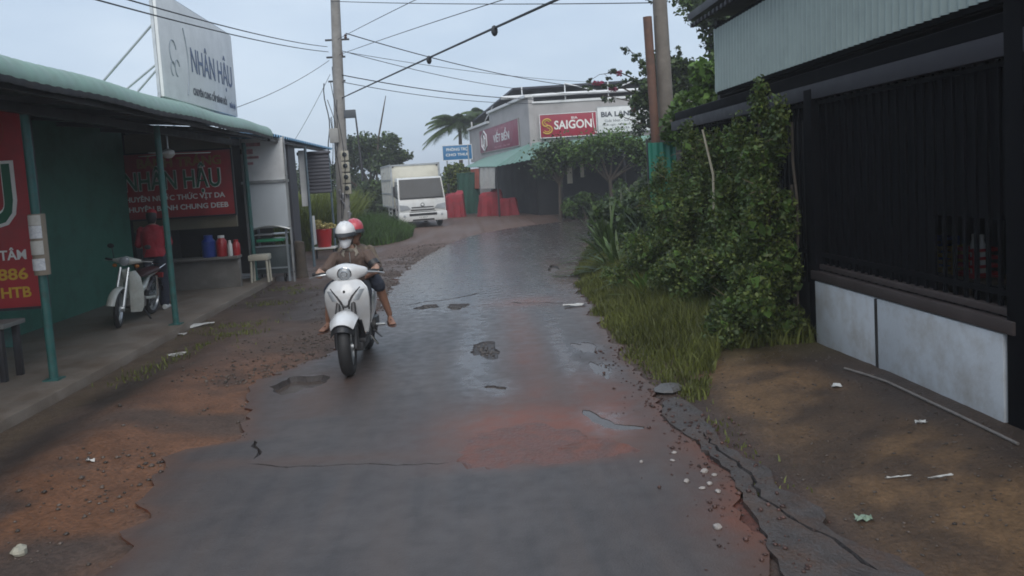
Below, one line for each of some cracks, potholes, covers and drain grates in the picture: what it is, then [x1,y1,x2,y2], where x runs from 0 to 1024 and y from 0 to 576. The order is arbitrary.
crack [704,433,879,571]
pothole [470,341,500,360]
pothole [271,375,330,395]
pothole [582,410,644,430]
crack [251,441,448,468]
